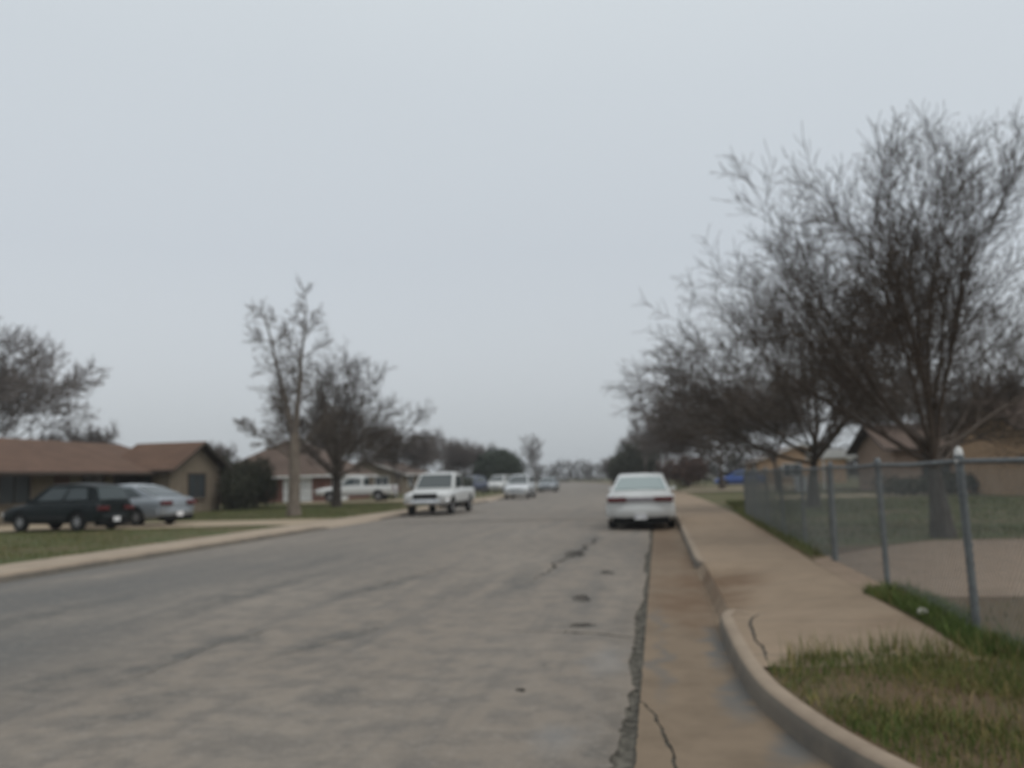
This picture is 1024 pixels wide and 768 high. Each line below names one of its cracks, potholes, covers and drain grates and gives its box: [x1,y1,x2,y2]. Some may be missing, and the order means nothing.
crack [502,524,677,768]
crack [748,614,768,660]
